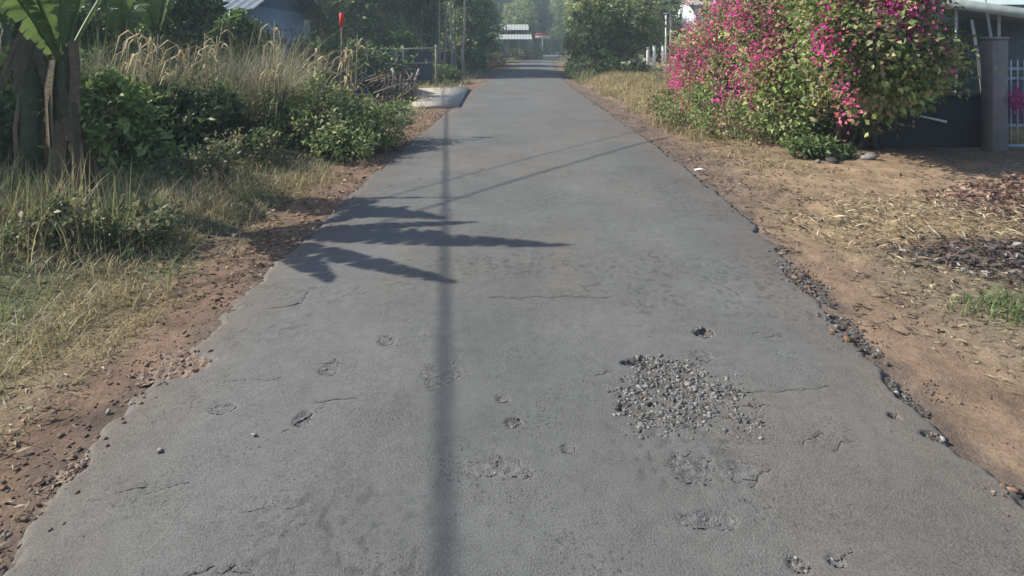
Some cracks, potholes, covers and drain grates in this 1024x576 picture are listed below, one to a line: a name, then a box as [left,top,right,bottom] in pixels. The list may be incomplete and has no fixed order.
pothole [787,556,810,574]
pothole [376,334,396,346]
pothole [459,454,535,480]
pothole [721,461,757,484]
pothole [319,362,341,376]
pothole [209,403,236,415]
pothole [693,326,714,339]
pothole [293,411,312,427]
pothole [667,452,715,485]
pothole [504,417,522,428]
pothole [827,555,844,568]
pothole [606,354,774,440]
